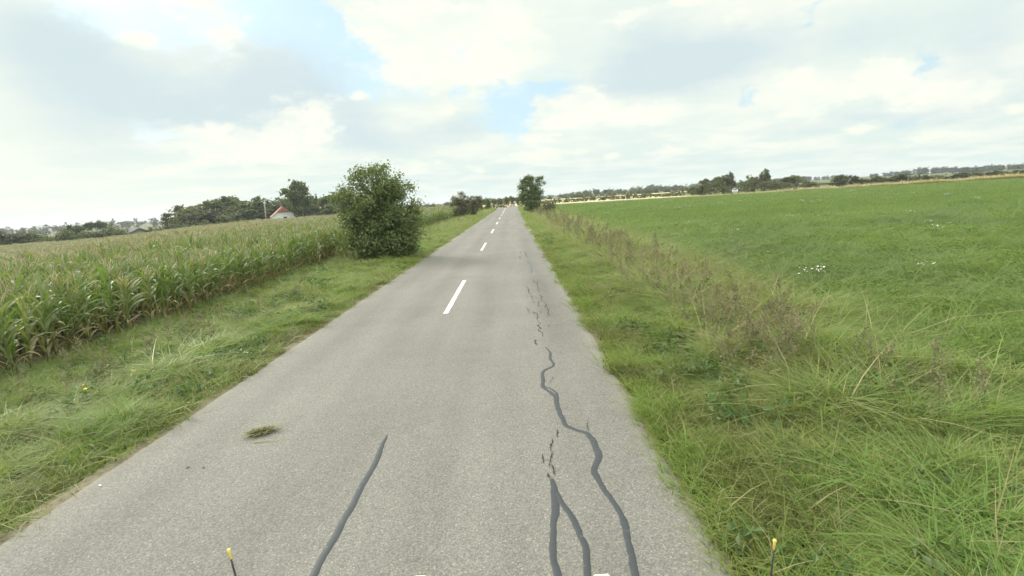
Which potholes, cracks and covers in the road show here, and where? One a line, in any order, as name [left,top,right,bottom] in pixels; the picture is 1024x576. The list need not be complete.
crack [542,429,559,477]
crack [527,278,551,345]
